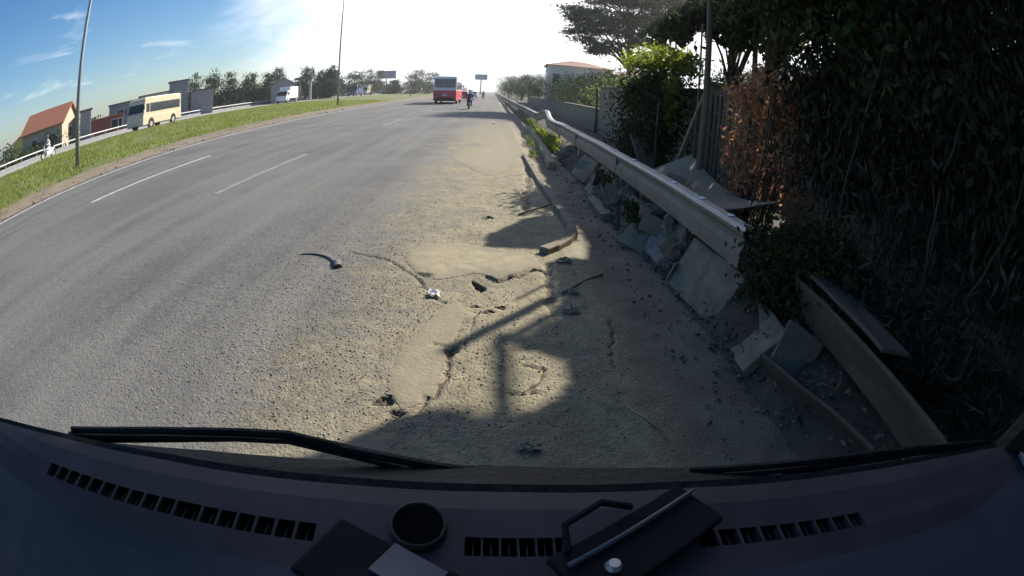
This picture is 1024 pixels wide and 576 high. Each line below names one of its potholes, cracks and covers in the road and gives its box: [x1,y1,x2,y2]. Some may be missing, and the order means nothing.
pothole [371,395,393,406]
crack [608,321,616,369]
crack [415,314,479,415]
crack [363,255,438,301]
crack [511,367,544,396]
